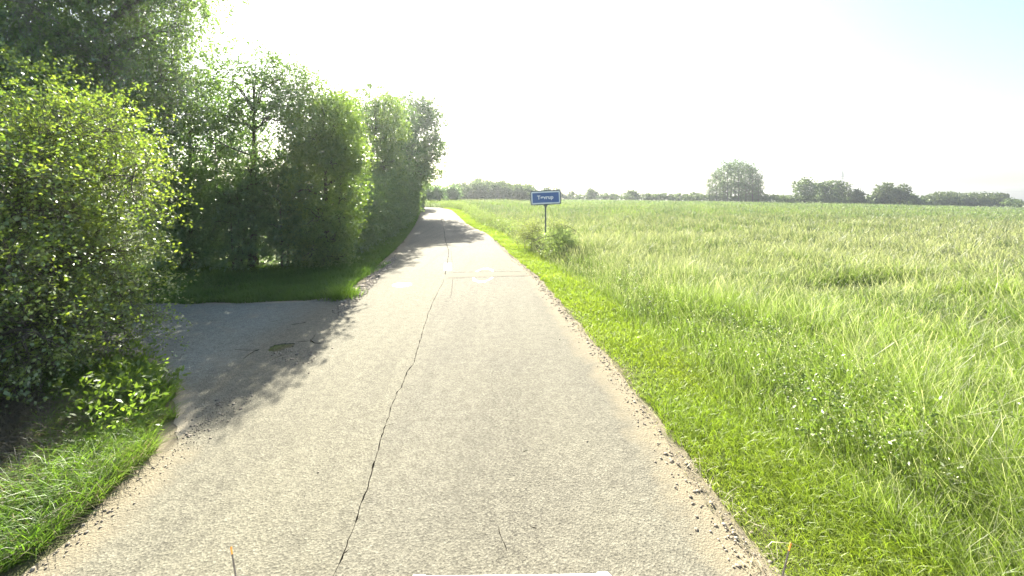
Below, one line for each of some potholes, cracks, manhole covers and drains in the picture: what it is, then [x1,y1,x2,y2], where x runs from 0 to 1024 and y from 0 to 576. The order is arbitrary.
crack [333,280,453,576]
